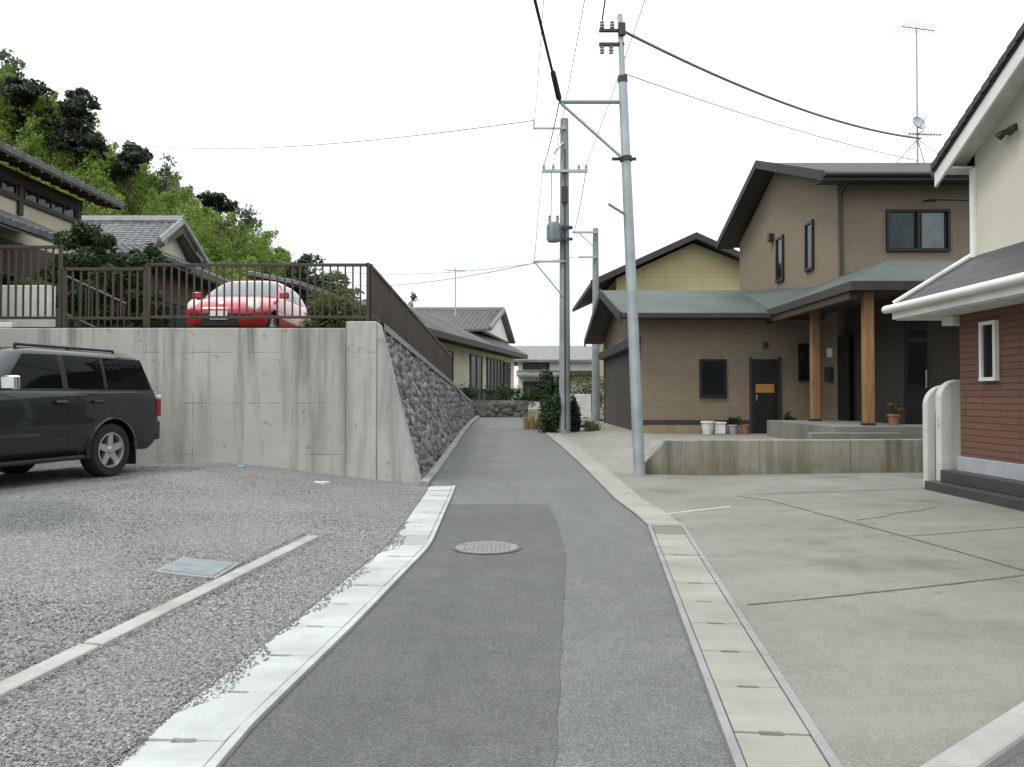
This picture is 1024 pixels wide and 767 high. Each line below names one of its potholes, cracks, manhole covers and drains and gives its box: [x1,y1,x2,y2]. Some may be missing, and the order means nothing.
manhole cover [451,541,522,555]
